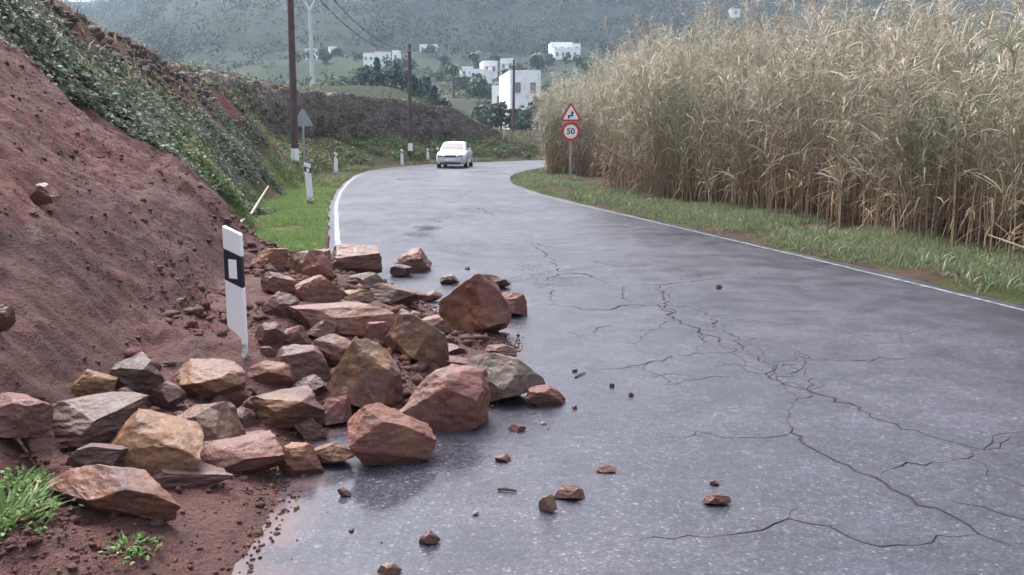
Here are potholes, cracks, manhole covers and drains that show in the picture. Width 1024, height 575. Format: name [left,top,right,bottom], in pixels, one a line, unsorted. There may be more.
crack [526,241,1024,547]
